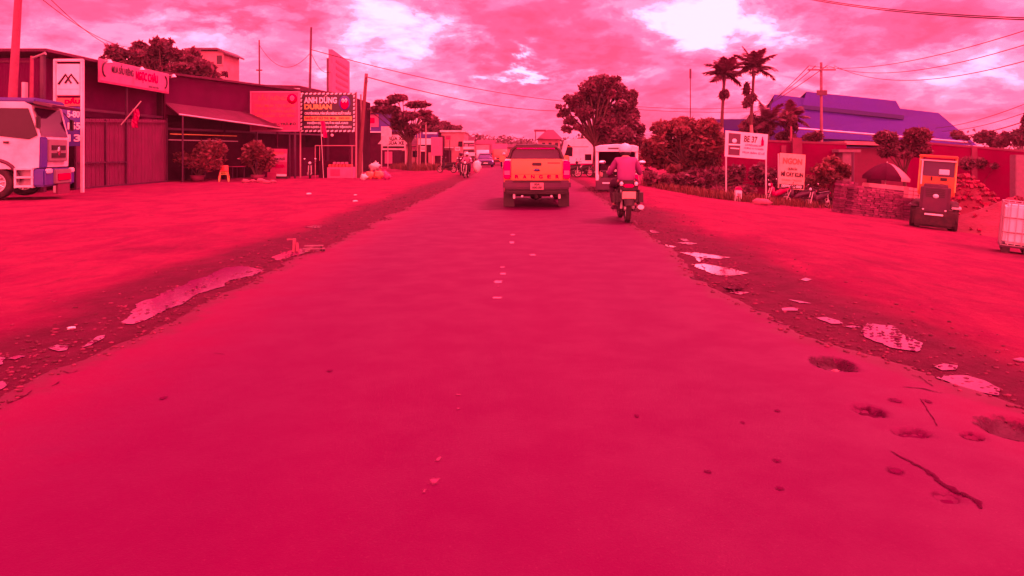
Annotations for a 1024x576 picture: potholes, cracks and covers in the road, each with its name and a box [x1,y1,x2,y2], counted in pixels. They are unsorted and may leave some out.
pothole [809,356,858,372]
pothole [973,415,1024,442]
pothole [858,407,885,418]
crack [912,375,941,425]
crack [892,451,982,508]
